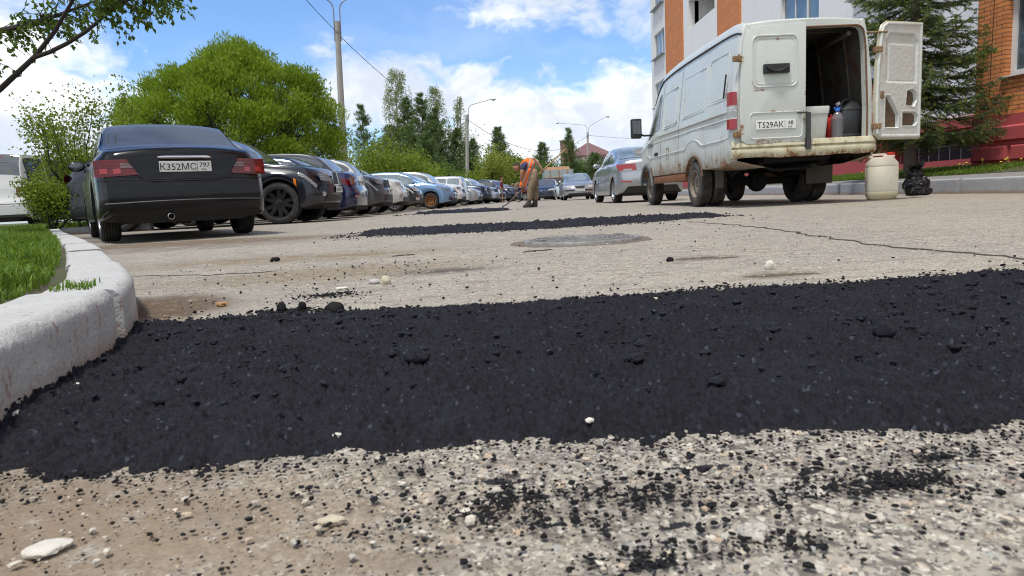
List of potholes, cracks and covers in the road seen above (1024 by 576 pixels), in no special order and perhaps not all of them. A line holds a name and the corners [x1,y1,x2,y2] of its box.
crack [701,222,1024,260]
manhole cover [510,233,653,248]
